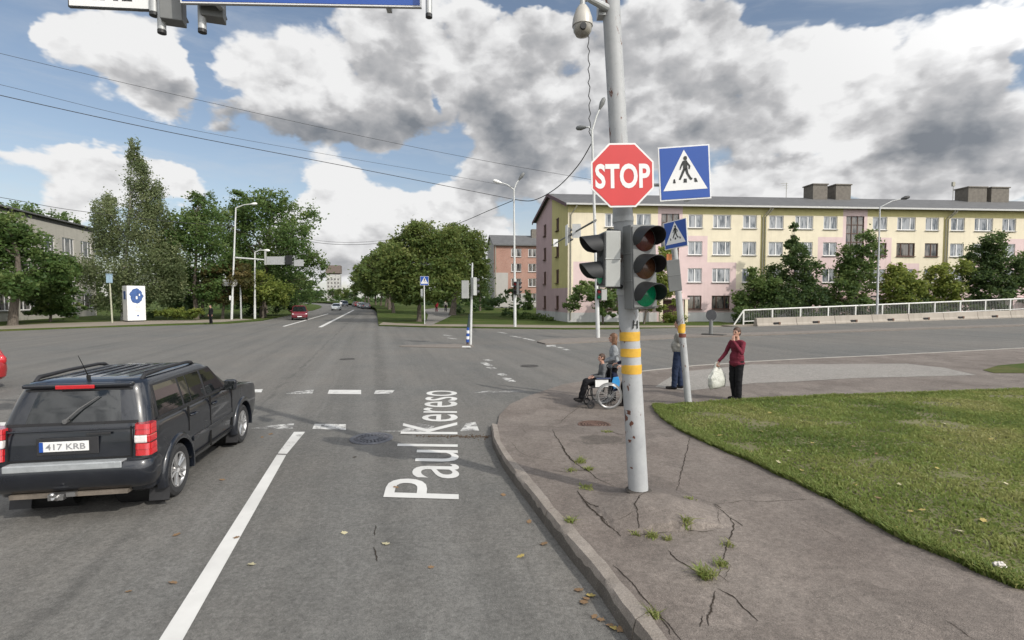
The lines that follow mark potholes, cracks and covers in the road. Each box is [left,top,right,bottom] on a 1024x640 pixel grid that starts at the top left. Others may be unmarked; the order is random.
crack [613,565,681,640]
crack [512,431,820,627]
